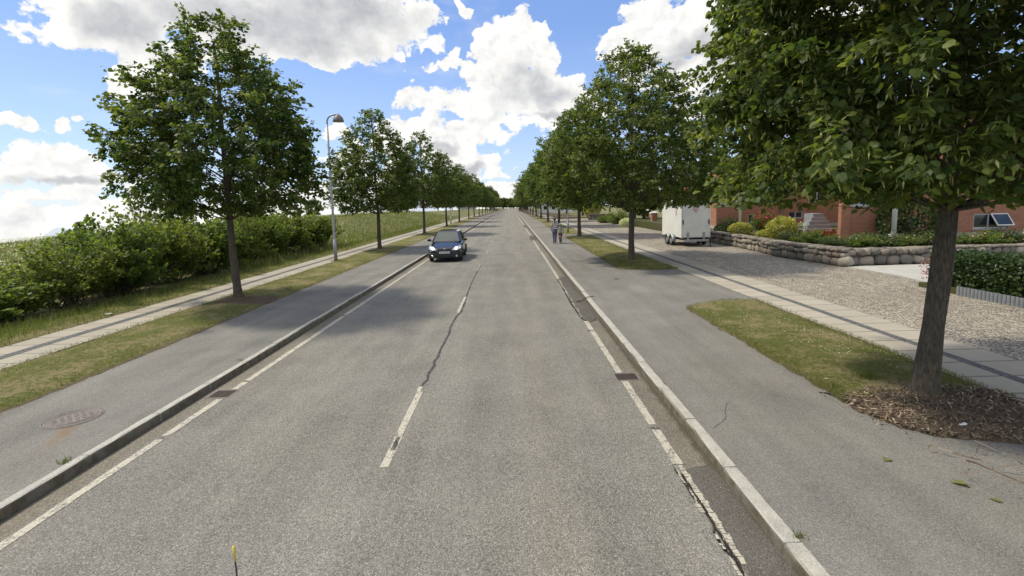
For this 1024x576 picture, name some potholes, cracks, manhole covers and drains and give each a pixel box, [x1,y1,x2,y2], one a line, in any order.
crack [674,467,745,576]
drain grate [204,389,240,399]
manhole cover [39,407,105,430]
crack [557,279,595,331]
drain grate [612,373,642,381]
